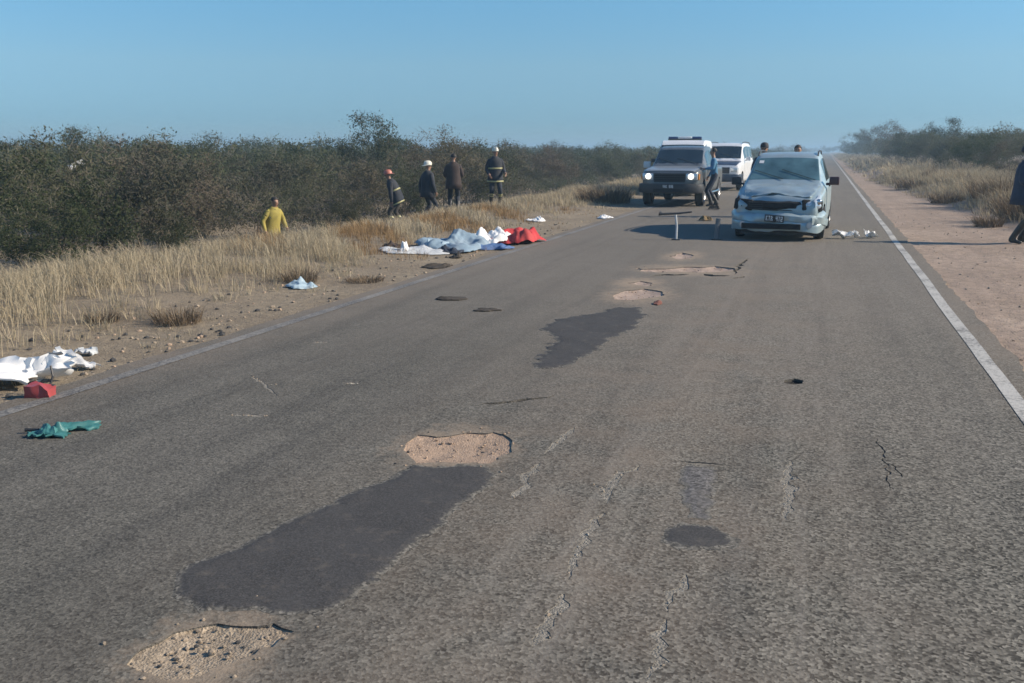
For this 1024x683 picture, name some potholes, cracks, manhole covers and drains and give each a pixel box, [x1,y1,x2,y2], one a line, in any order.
crack [874,437,903,491]
crack [511,427,640,648]
pothole [101,595,319,681]
crack [779,461,799,520]
pothole [394,427,514,473]
crack [647,575,689,679]
crack [252,376,281,396]
pothole [608,289,668,302]
